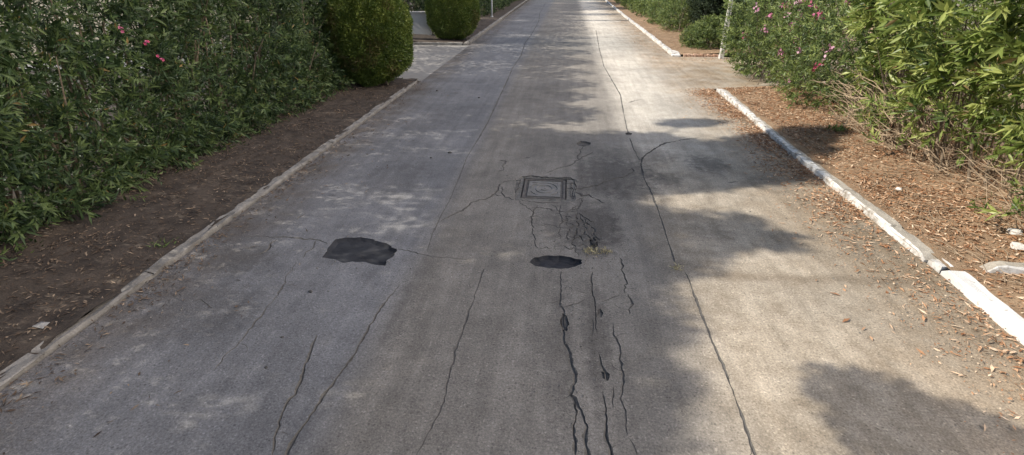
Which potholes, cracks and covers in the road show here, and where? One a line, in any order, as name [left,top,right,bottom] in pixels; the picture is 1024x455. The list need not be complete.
crack [400,4,760,455]
manhole cover [514,176,577,202]
